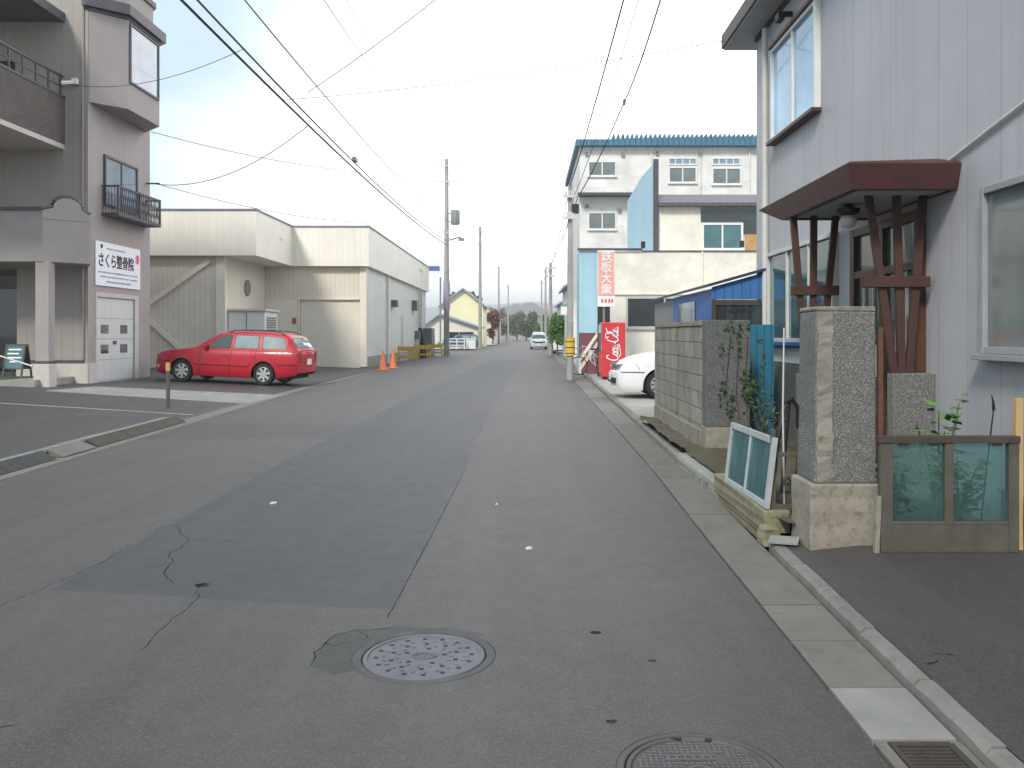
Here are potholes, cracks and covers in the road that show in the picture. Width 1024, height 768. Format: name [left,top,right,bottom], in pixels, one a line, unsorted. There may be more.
manhole cover [351,630,496,685]
crack [144,591,200,648]
manhole cover [616,732,783,768]
crack [151,524,235,584]
drain grate [887,742,977,768]
